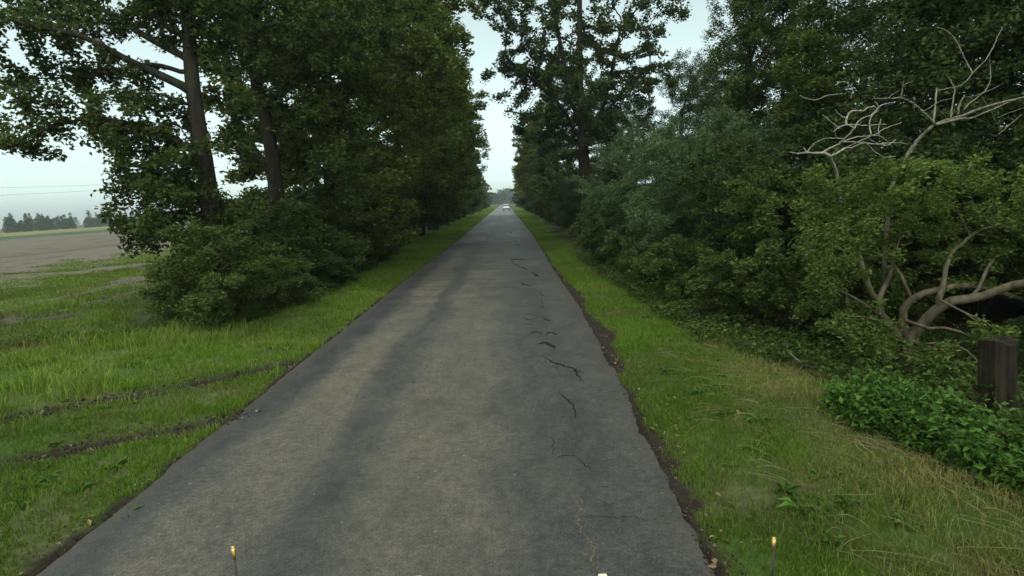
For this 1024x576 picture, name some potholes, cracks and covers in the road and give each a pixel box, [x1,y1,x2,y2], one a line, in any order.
crack [509,231,584,419]
crack [551,437,651,574]
